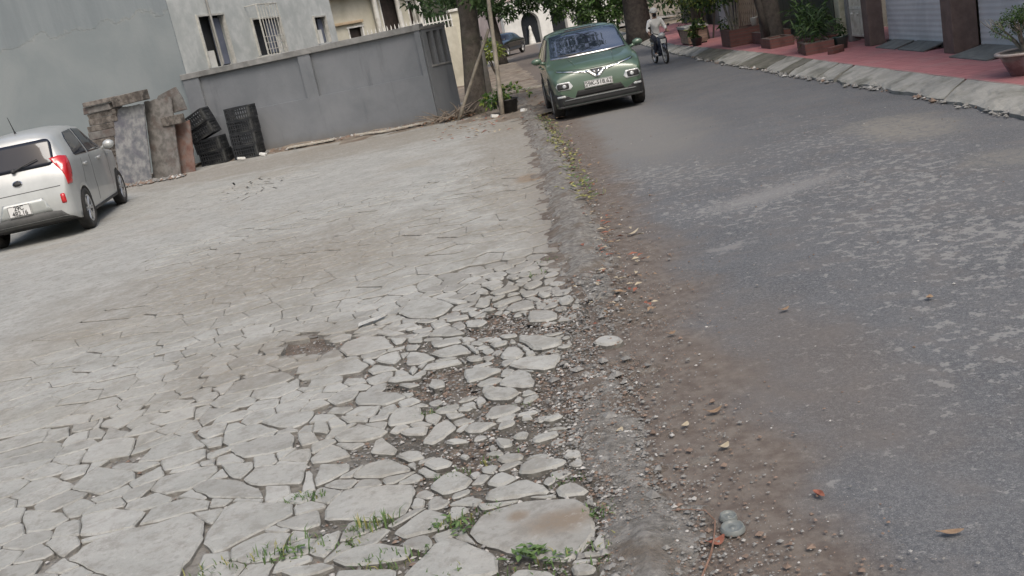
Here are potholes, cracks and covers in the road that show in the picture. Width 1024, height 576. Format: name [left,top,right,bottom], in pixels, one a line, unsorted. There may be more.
pothole [285,334,340,356]
pothole [387,368,488,406]
crack [22,262,603,576]
pothole [536,359,587,427]
pothole [418,434,496,482]
pothole [469,316,573,340]
